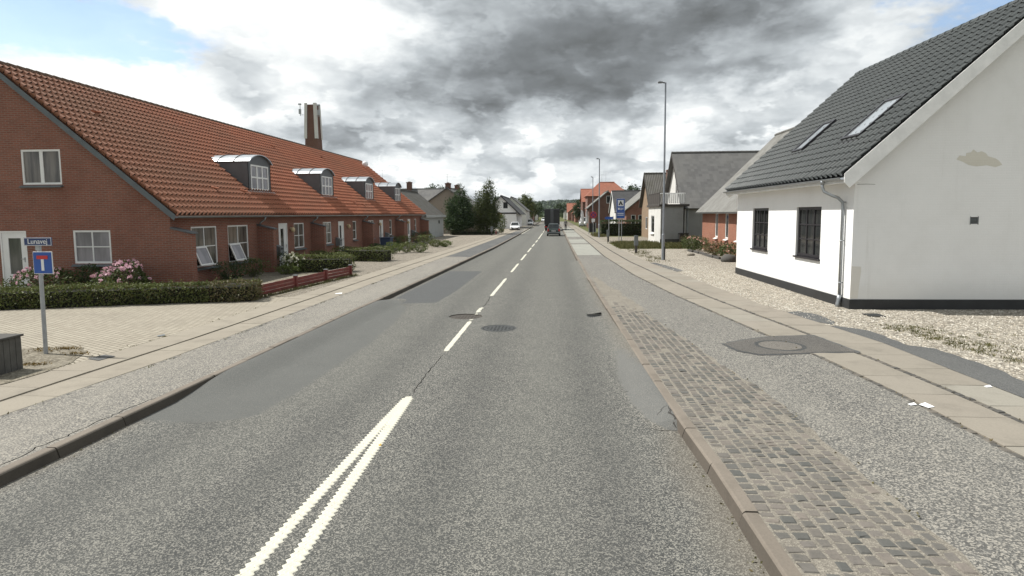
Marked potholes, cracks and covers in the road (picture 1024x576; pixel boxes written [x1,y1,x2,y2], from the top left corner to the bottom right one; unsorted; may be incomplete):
manhole cover [754,340,807,351]
crack [1,398,155,465]
